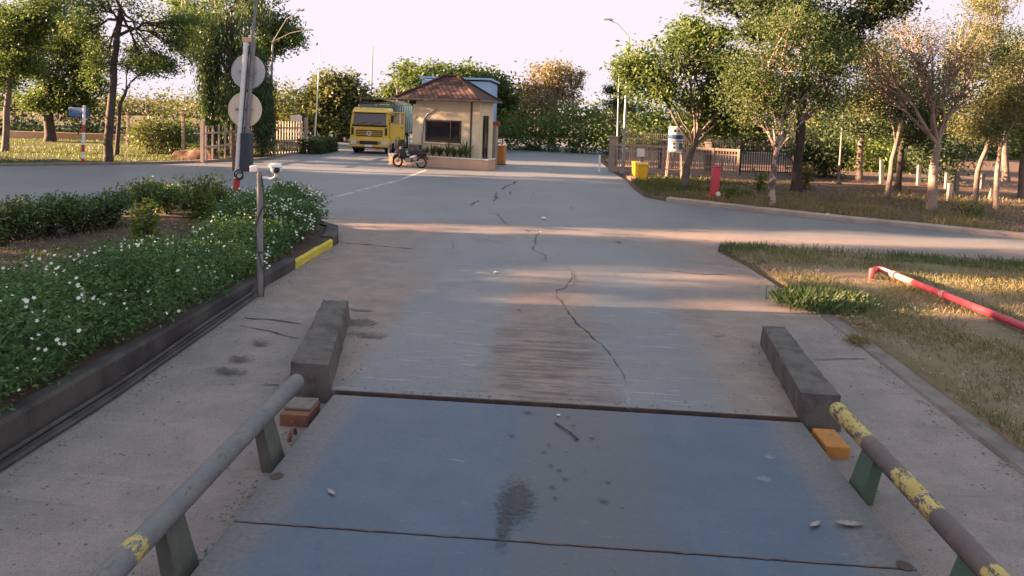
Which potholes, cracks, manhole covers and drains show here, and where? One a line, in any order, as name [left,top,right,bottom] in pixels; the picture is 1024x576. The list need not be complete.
crack [556,269,626,381]
